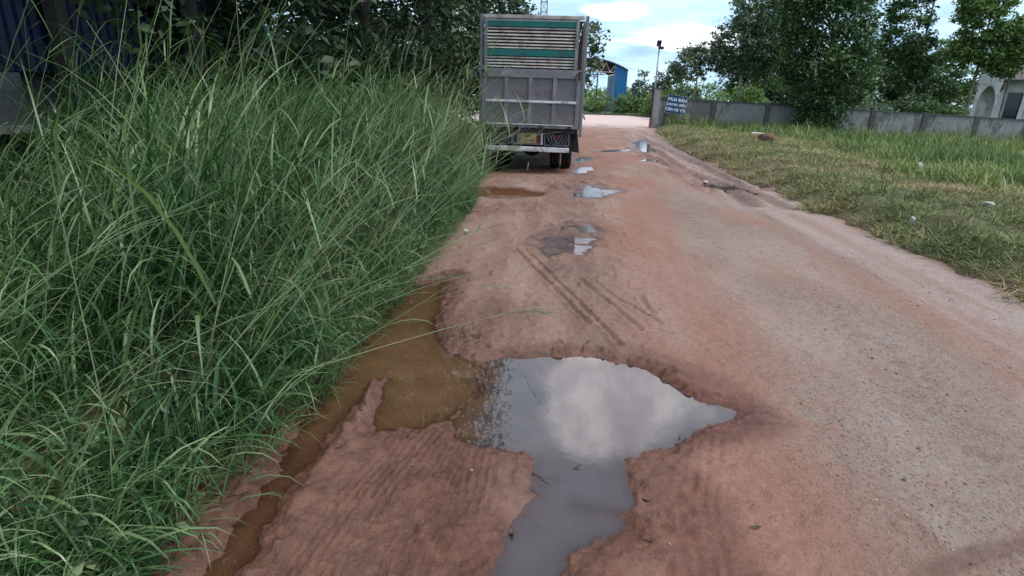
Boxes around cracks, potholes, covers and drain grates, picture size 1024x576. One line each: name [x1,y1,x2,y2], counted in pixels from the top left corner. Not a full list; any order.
pothole [531,222,605,257]
pothole [629,139,657,153]
pothole [435,345,752,576]
pothole [477,187,548,199]
pothole [569,166,597,174]
pothole [569,182,623,199]
